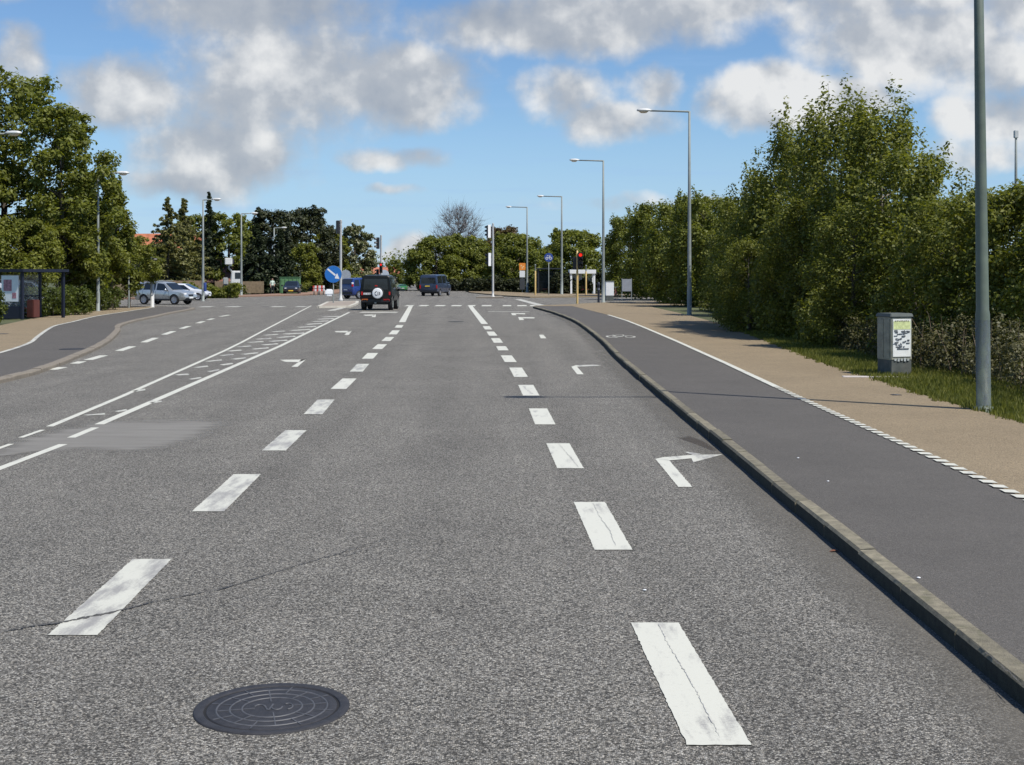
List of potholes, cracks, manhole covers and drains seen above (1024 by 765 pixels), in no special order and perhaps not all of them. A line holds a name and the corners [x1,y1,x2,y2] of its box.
crack [658,624,720,736]
manhole cover [193,683,350,735]
crack [0,529,414,632]
